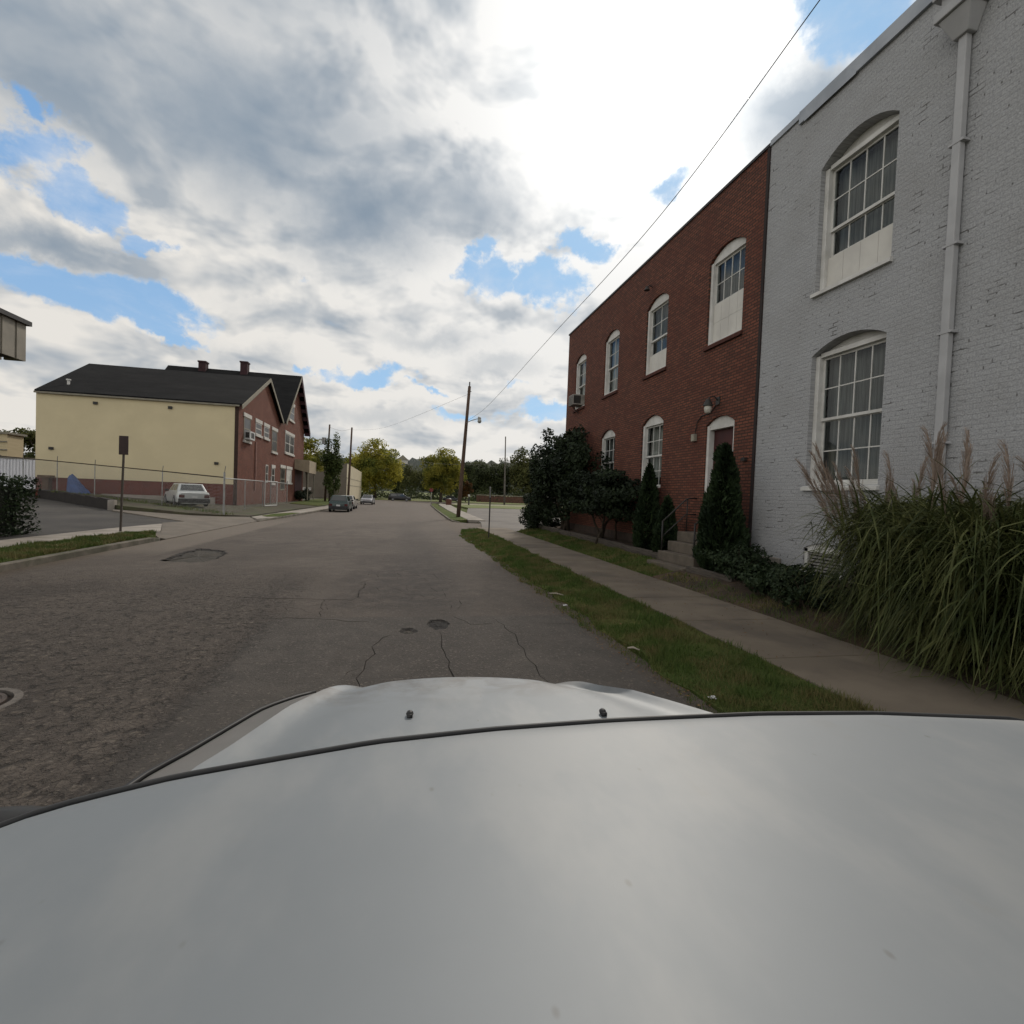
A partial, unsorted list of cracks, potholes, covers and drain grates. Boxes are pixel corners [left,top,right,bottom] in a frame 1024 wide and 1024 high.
manhole cover [0,688,24,709]
pothole [427,619,450,630]
pothole [160,548,227,563]
crack [252,572,548,682]
